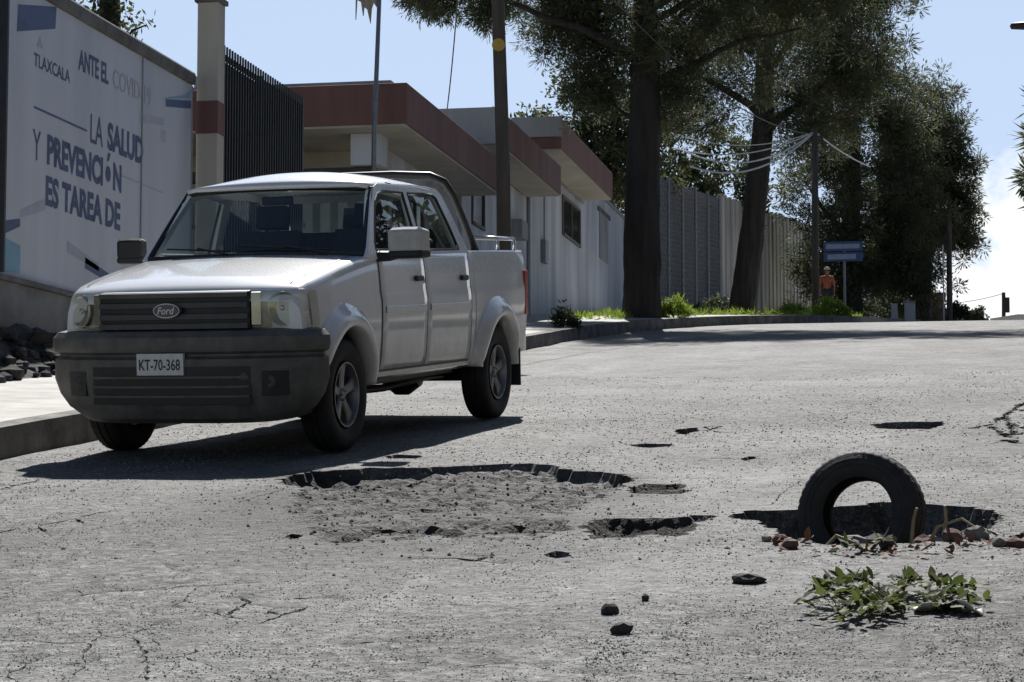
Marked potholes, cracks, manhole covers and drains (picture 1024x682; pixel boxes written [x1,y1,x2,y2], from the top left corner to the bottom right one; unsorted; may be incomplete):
pothole [577,515,718,539]
crack [971,402,1024,444]
pothole [273,463,636,546]
crack [0,510,112,533]
pothole [625,484,689,494]
crack [152,565,311,624]
pothole [728,502,1005,543]
pothole [870,421,945,429]
crack [5,623,200,682]
